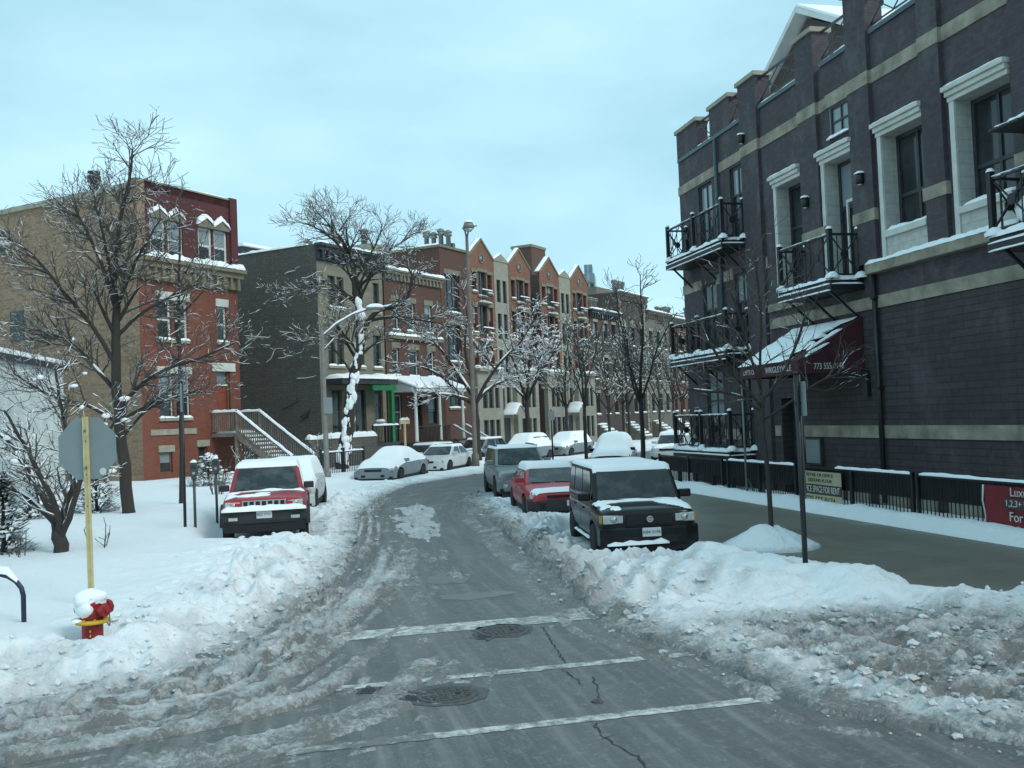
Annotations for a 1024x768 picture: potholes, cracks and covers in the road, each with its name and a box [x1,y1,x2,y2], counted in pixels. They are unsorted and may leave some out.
manhole cover [412,683,489,706]
manhole cover [472,624,533,637]
crack [541,626,599,698]
crack [593,722,646,768]
